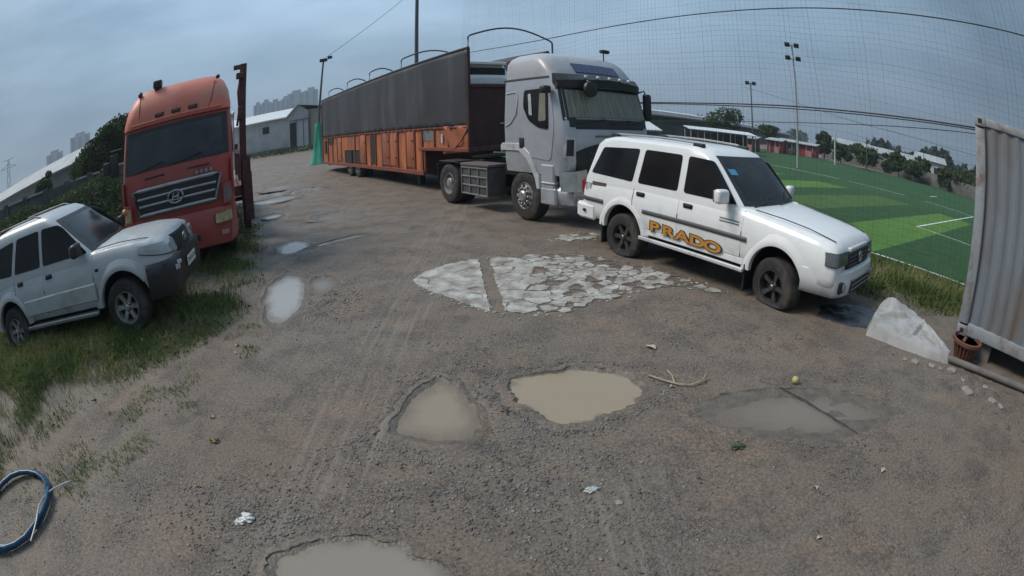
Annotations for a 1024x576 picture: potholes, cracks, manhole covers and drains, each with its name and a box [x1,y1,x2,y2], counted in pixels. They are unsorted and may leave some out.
pothole [492,362,661,432]
pothole [375,372,492,454]
pothole [256,268,312,339]
pothole [249,527,471,576]
crack [422,233,722,313]
pothole [272,239,314,256]
